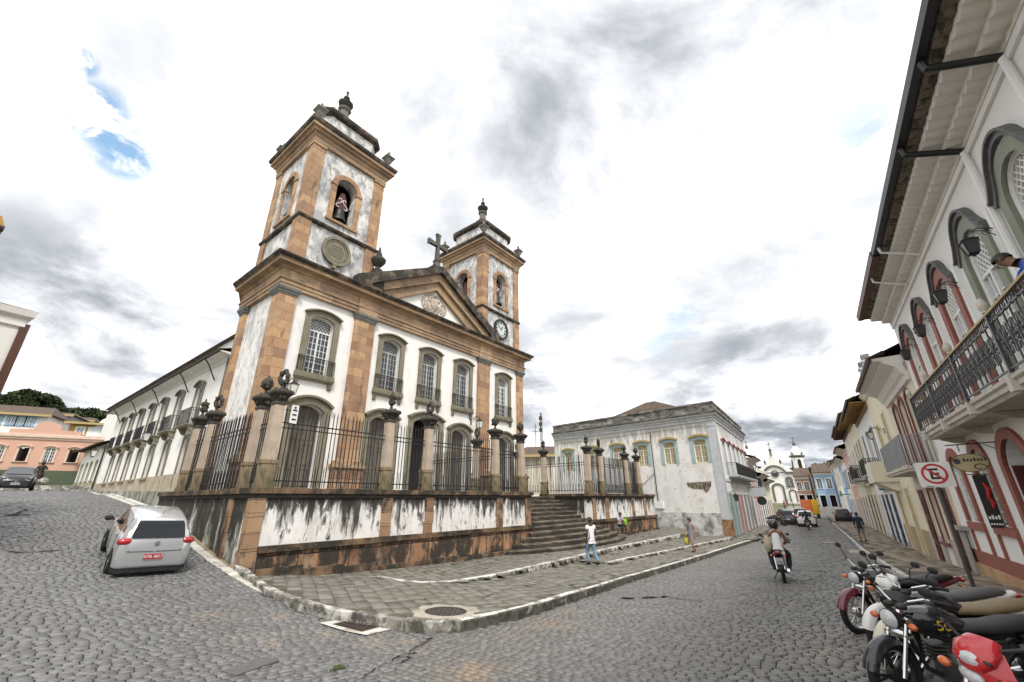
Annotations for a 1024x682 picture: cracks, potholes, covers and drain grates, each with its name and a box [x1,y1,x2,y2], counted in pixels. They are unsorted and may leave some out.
drain grate [320,620,390,635]
manhole cover [411,604,480,620]
